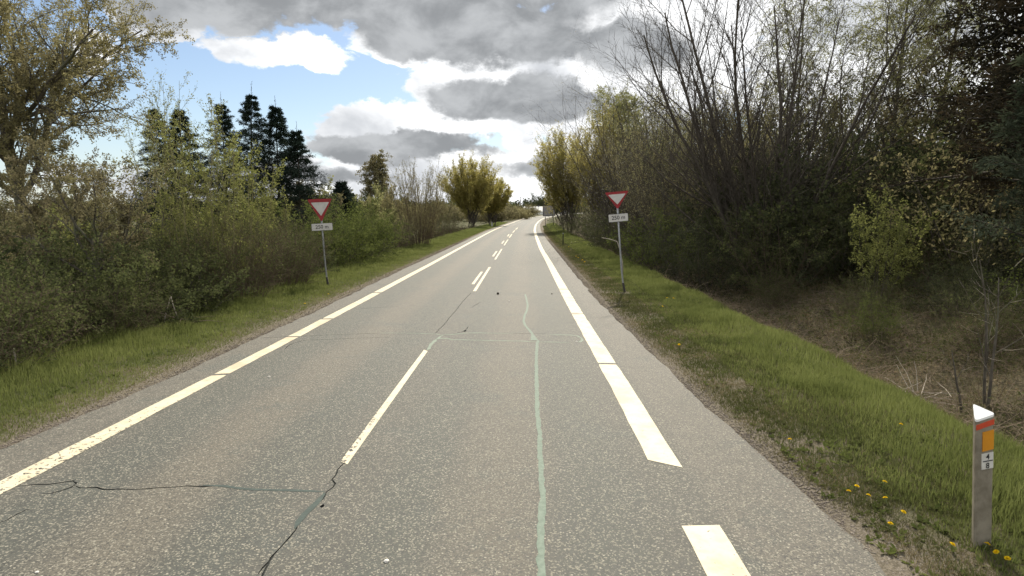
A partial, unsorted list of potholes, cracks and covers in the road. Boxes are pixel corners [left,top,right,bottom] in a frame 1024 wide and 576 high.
crack [0,463,344,576]
